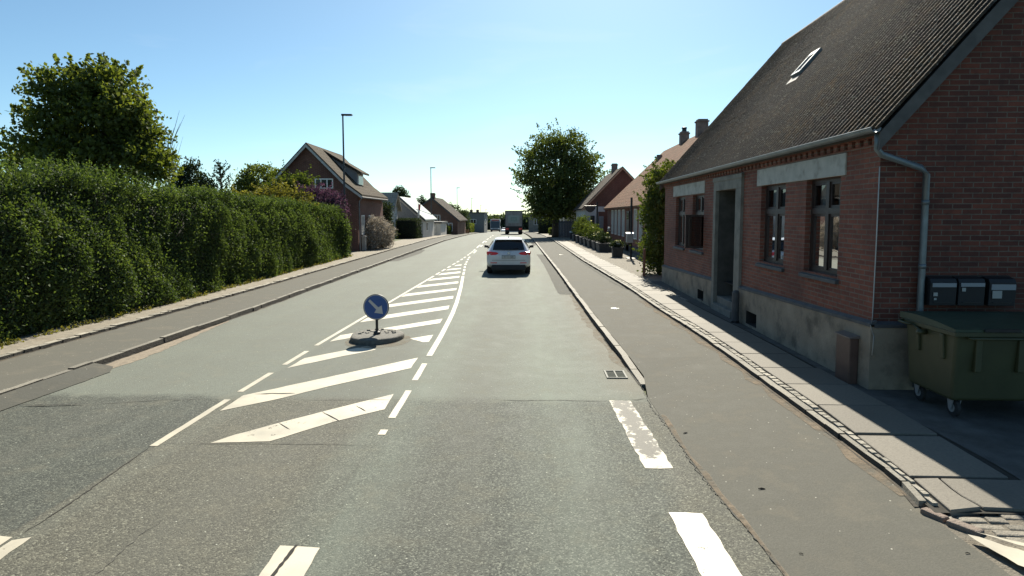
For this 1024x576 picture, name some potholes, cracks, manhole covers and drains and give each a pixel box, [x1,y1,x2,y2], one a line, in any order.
drain grate [604,370,628,379]
